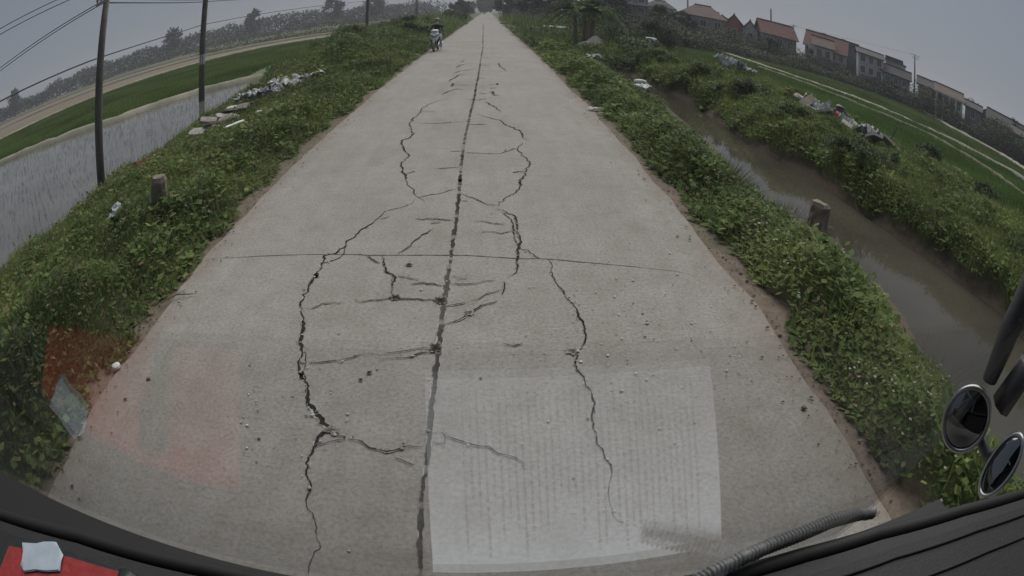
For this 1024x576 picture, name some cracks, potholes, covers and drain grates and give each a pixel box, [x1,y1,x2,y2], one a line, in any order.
crack [296,57,624,575]
